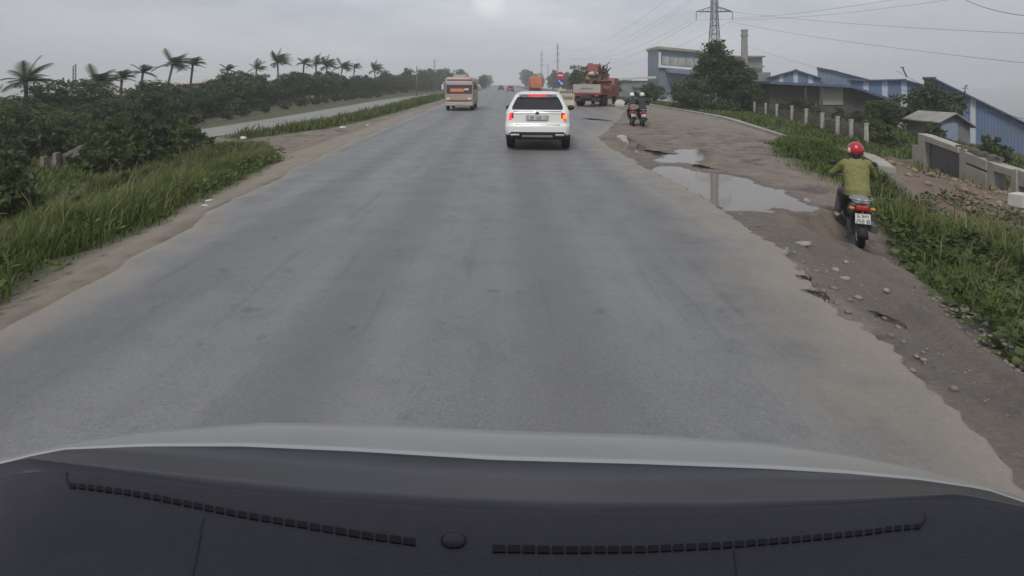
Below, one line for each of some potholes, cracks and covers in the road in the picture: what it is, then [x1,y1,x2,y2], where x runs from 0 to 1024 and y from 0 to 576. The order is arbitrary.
pothole [867,310,908,330]
pothole [801,289,830,301]
